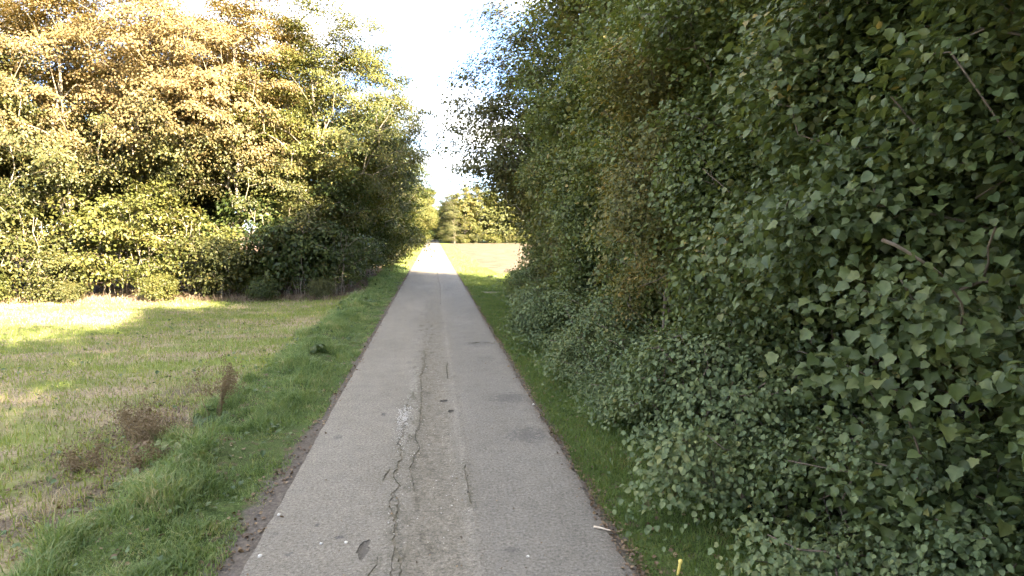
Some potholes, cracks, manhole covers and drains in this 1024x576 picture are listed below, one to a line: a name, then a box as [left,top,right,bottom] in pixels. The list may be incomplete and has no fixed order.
crack [464,464,473,506]
pothole [356,539,371,560]
crack [368,351,427,576]
